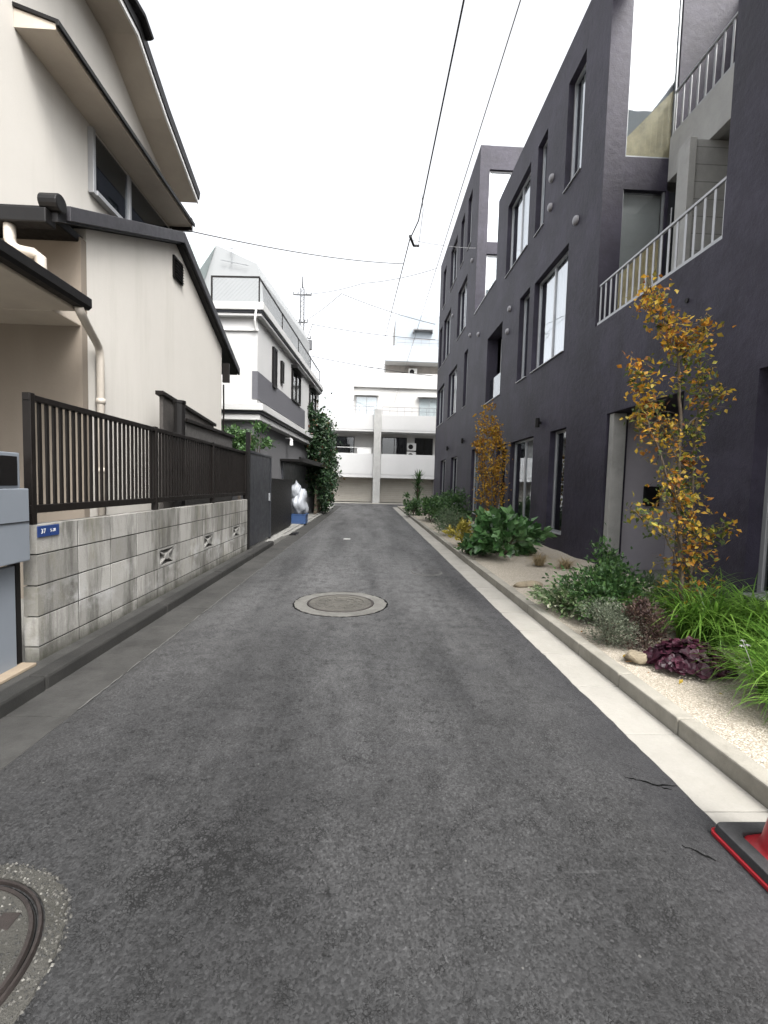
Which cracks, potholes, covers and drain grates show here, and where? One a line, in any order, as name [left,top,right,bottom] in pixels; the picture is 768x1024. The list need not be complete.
crack [682,845,716,861]
manhole cover [293,592,388,618]
crack [626,777,672,790]
manhole cover [0,862,73,1024]
